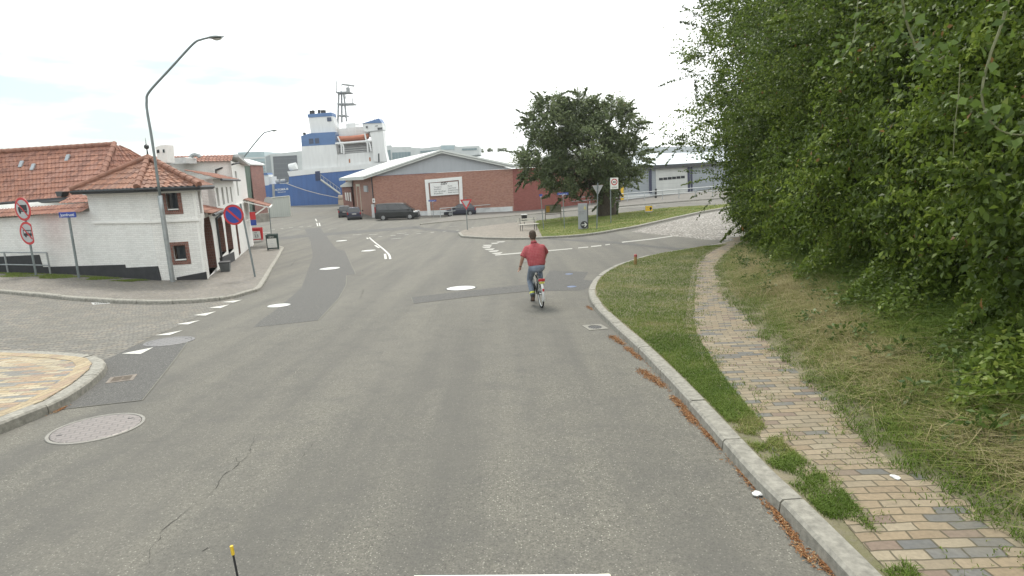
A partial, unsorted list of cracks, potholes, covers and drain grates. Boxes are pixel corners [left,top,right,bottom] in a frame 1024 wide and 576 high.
drain grate [105,374,137,384]
manhole cover [45,413,146,445]
manhole cover [143,336,195,347]
crack [141,439,254,566]
